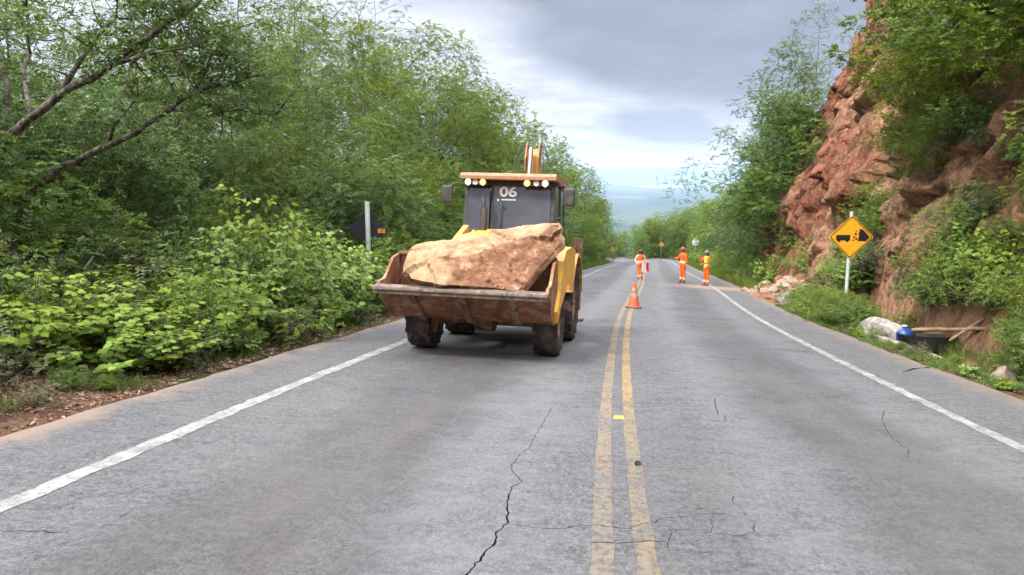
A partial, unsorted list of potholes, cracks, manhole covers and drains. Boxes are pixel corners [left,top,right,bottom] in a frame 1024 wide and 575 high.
crack [465,408,759,575]
